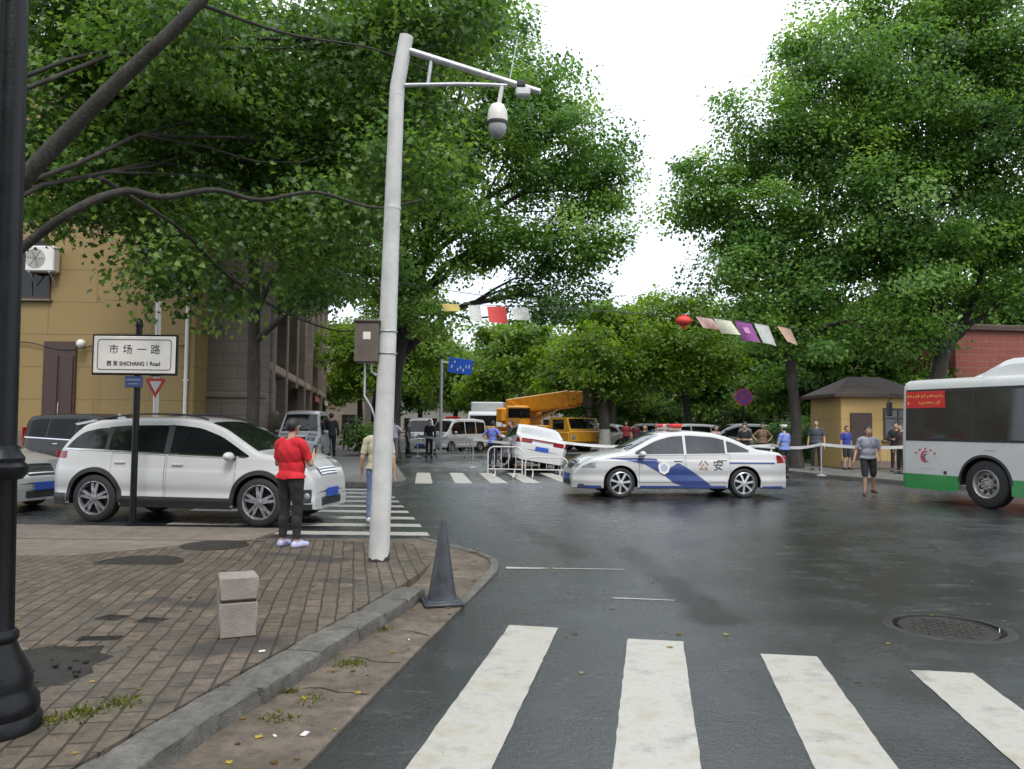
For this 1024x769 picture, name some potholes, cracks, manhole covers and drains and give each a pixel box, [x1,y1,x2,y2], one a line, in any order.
manhole cover [883,613,1019,644]
manhole cover [180,540,249,551]
manhole cover [93,555,183,565]
pothole [23,645,114,688]
